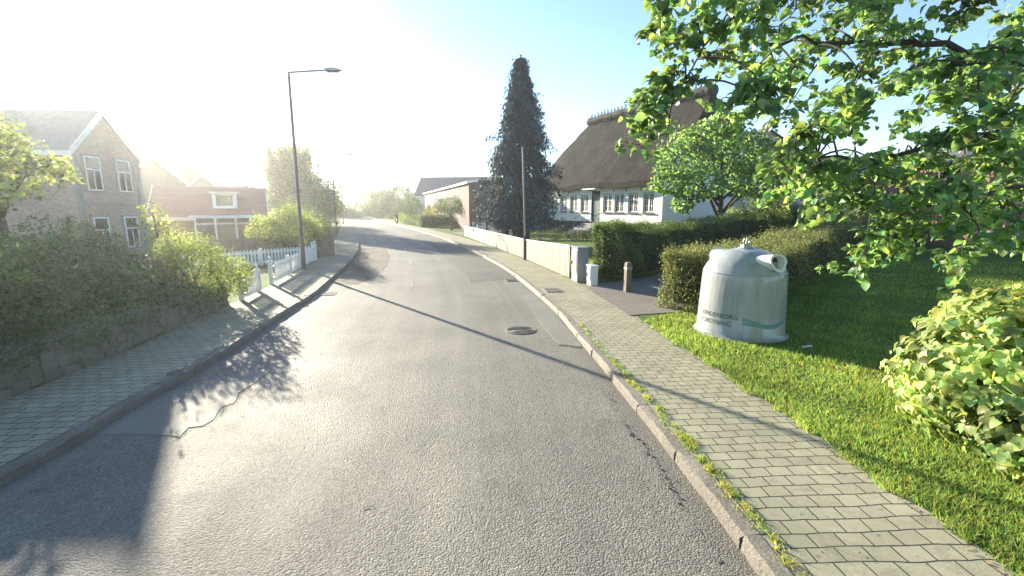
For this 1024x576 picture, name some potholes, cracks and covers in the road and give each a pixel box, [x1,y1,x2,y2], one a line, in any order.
crack [601,390,736,570]
manhole cover [506,326,536,335]
crack [129,368,267,438]
